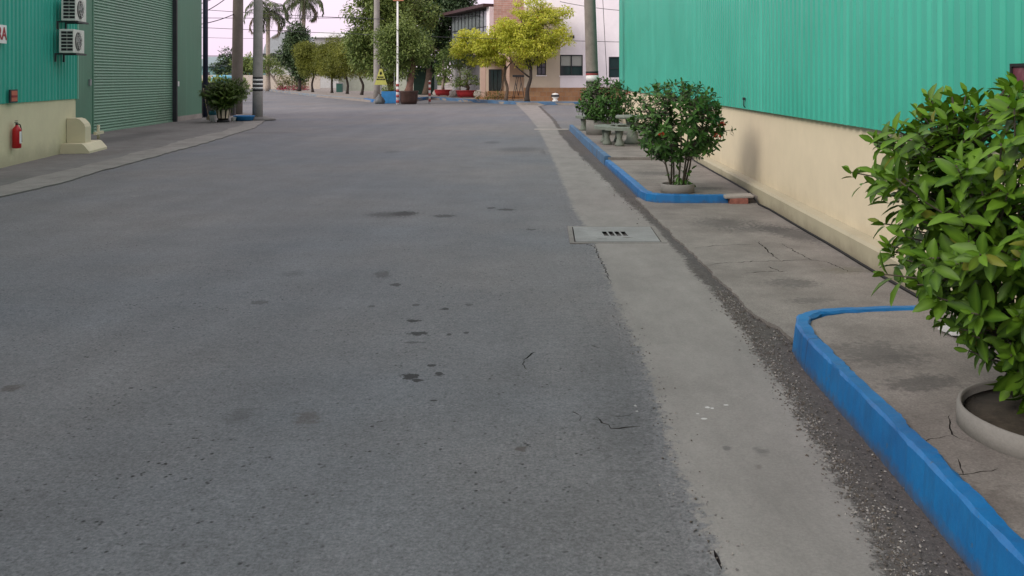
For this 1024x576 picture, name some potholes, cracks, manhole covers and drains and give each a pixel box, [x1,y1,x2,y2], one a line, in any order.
crack [706,243,859,272]
